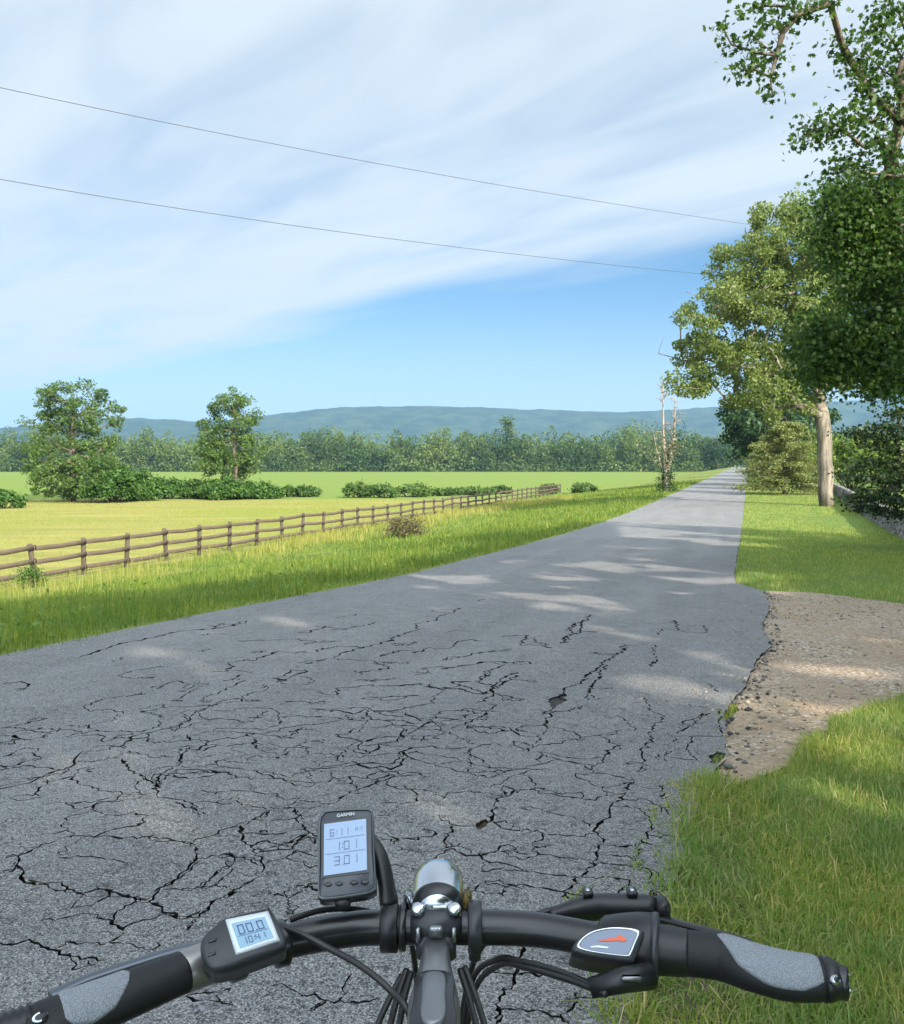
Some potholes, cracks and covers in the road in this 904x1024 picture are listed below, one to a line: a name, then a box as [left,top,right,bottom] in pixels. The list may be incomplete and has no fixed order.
crack [272,971,379,1012]
crack [0,599,723,970]
pothole [548,692,567,710]
crack [483,947,620,1024]
crack [185,987,236,1007]
